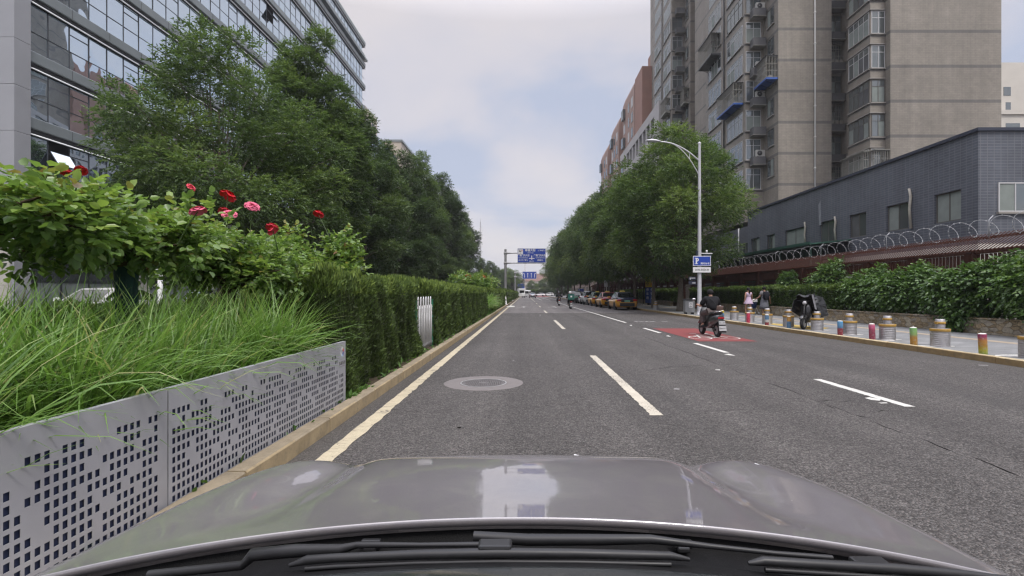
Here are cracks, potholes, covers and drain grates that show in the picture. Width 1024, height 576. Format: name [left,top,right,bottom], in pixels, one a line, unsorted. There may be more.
manhole cover [444,376,523,391]
